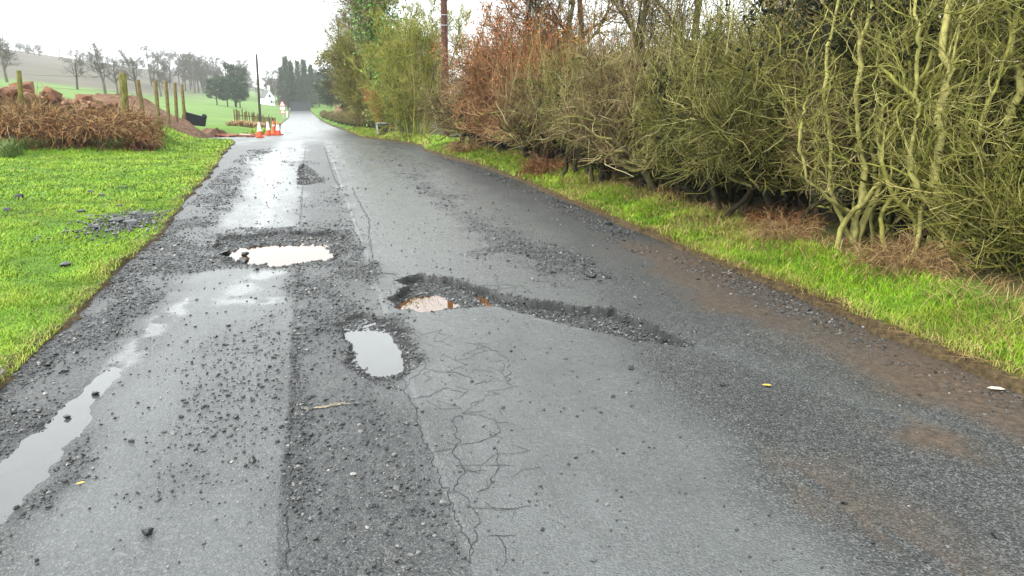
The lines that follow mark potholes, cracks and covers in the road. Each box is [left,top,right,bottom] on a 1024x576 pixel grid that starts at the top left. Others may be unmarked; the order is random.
pothole [296,164,324,185]
pothole [482,286,694,348]
crack [403,330,539,566]
pothole [383,273,489,313]
pothole [212,230,355,268]
pothole [333,312,418,382]
